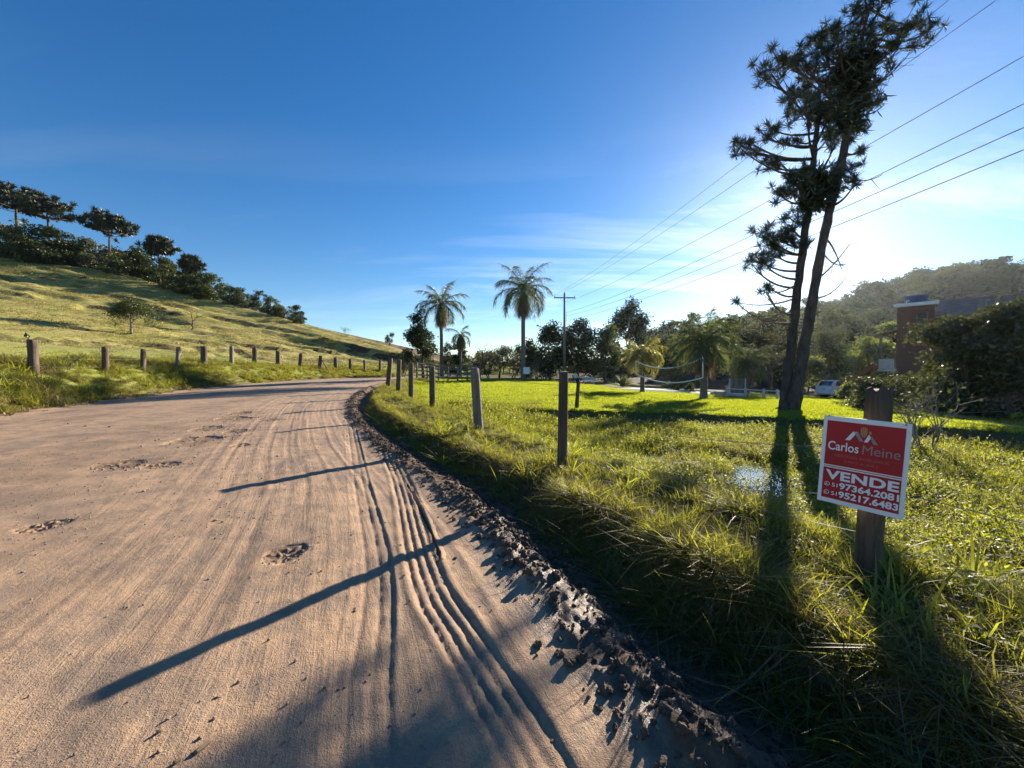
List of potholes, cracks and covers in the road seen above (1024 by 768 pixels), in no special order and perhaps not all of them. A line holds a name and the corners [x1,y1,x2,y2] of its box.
pothole [92,461,144,470]
pothole [15,520,70,534]
pothole [263,545,307,564]
